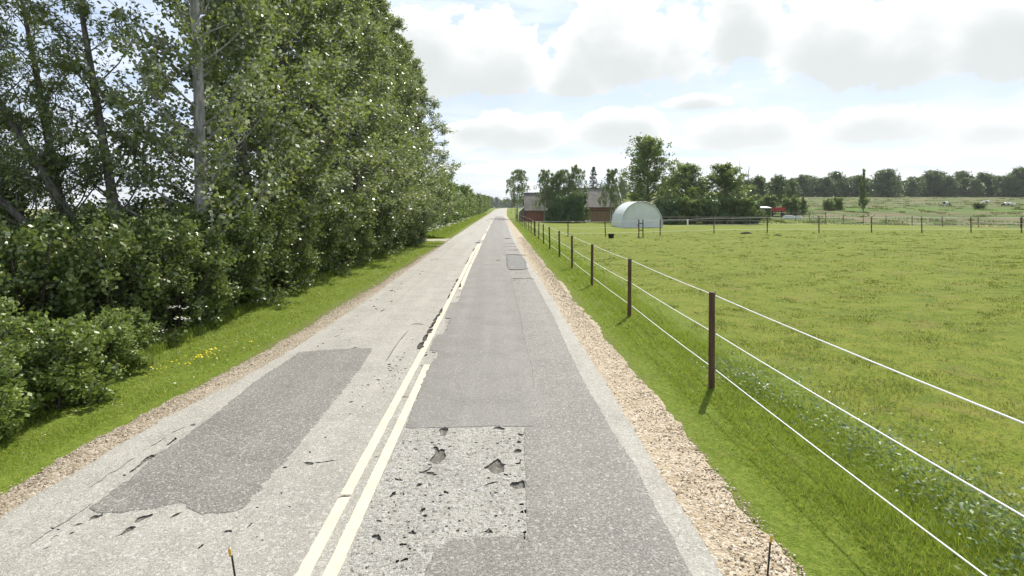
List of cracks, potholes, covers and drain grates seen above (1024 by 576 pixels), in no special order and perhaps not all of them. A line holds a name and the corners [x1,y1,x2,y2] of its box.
crack [31,505,89,550]
pothole [430,446,446,464]
pothole [484,459,506,474]
